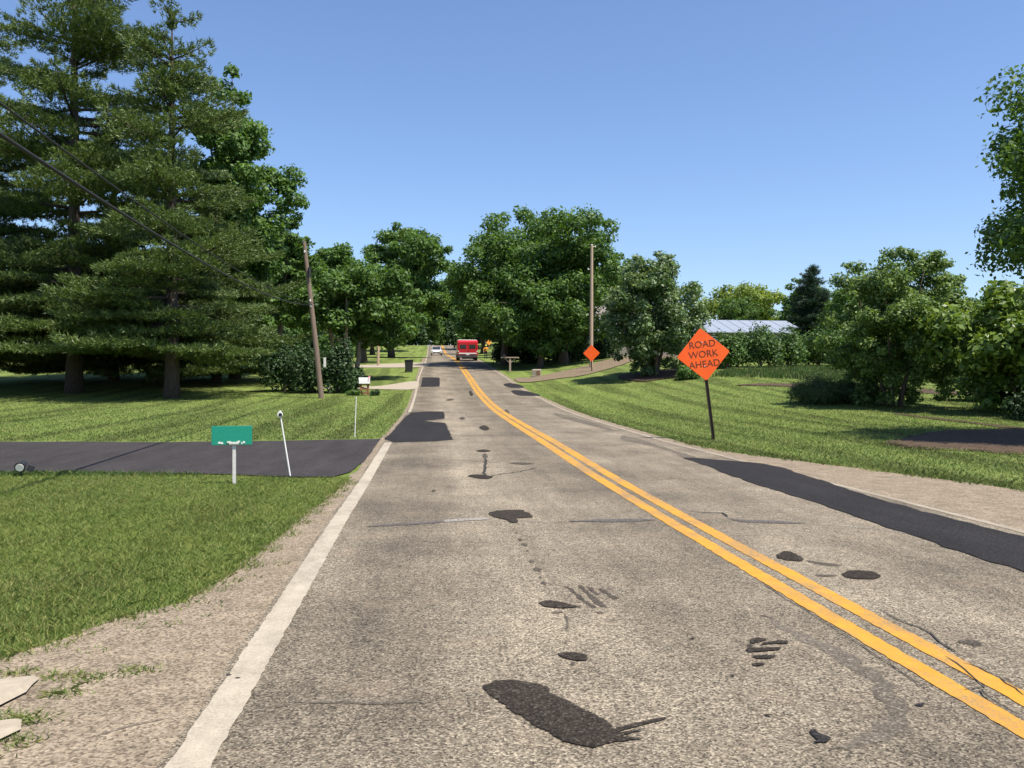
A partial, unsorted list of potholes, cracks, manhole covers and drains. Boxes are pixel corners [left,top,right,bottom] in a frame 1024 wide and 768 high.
crack [759,581,1024,716]
